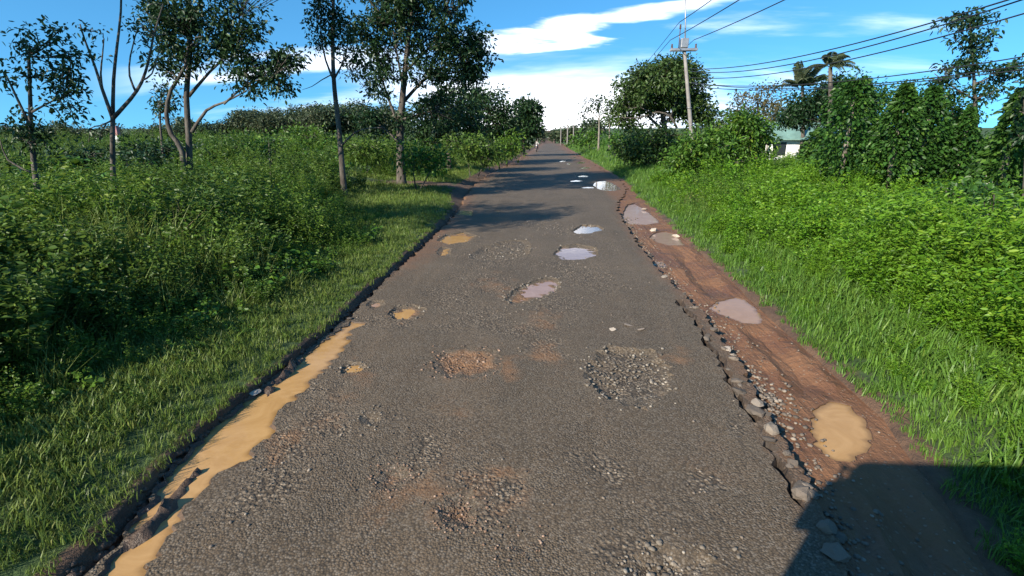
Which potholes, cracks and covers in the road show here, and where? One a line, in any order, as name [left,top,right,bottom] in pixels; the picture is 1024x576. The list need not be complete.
pothole [502,275,563,306]
pothole [553,244,604,260]
pothole [436,232,480,244]
pothole [577,343,678,411]
pothole [422,475,499,540]
pothole [593,180,622,191]
pothole [98,321,366,576]
pothole [387,302,428,320]
pothole [571,224,605,234]
pothole [421,344,513,380]
